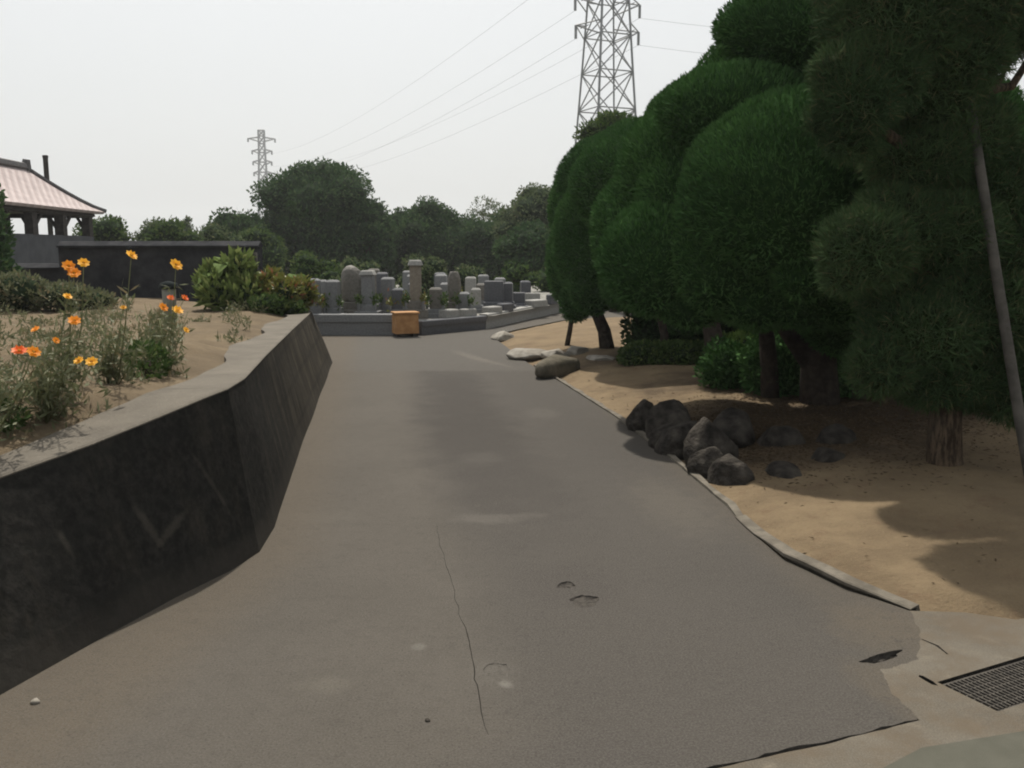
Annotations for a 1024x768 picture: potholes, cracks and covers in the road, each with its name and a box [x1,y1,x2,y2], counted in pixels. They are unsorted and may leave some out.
pothole [483,662,511,682]
crack [437,532,488,733]
pothole [570,595,599,608]
drain grate [938,656,1024,711]
pothole [859,650,902,663]
